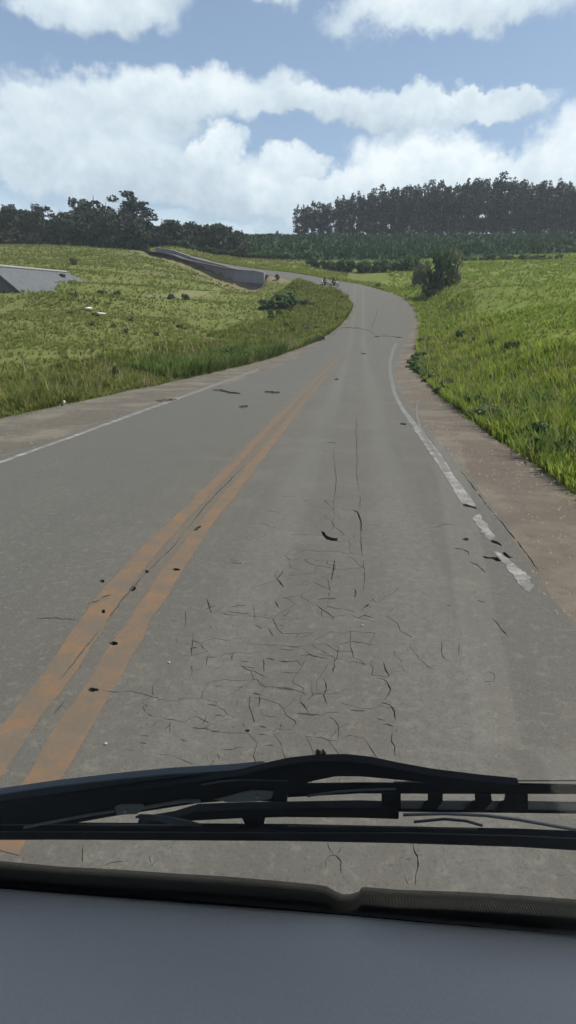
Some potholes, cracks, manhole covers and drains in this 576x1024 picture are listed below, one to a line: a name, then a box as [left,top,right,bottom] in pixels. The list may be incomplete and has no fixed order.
crack [405,846,419,883]
crack [124,424,430,783]
